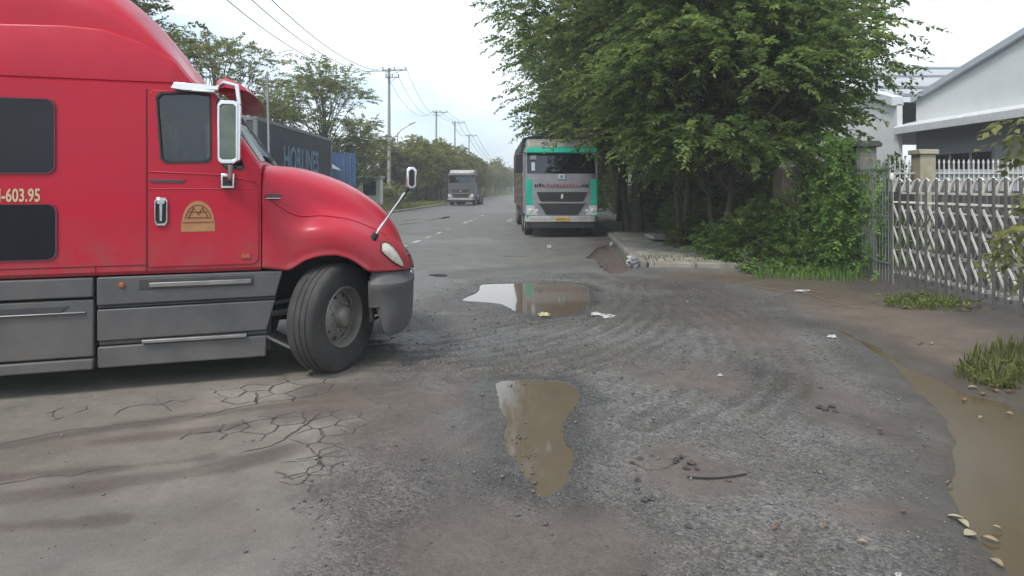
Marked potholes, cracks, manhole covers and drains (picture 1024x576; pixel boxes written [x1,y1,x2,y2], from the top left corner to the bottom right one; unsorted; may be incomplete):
pothole [495,379,581,498]
pothole [462,282,590,316]
crack [0,372,367,493]
pothole [586,246,627,274]
